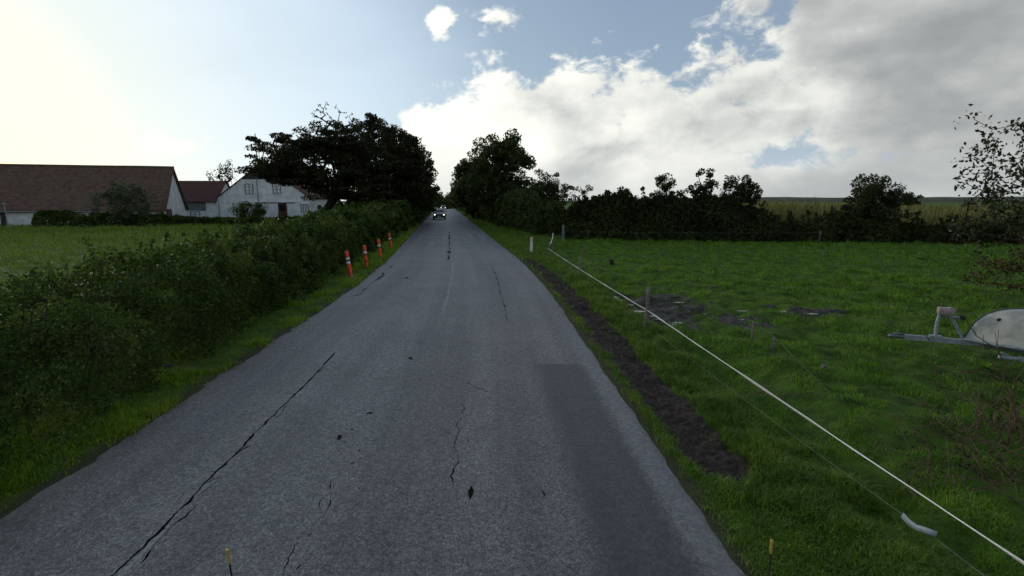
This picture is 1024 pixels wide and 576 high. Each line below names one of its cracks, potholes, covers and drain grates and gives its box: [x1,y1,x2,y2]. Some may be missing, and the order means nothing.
crack [450,381,488,487]
crack [111,353,348,576]
